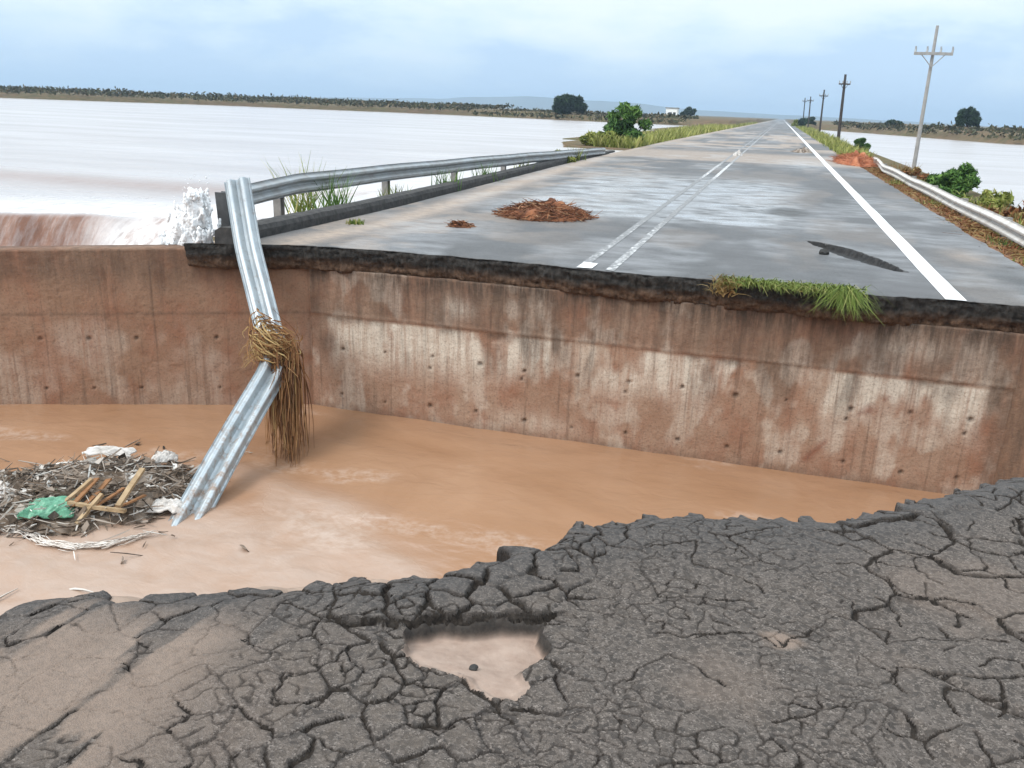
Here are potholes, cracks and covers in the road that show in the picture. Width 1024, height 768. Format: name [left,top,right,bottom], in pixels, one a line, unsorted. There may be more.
crack [593,518,850,768]
crack [4,521,654,768]
pothole [401,617,553,702]
